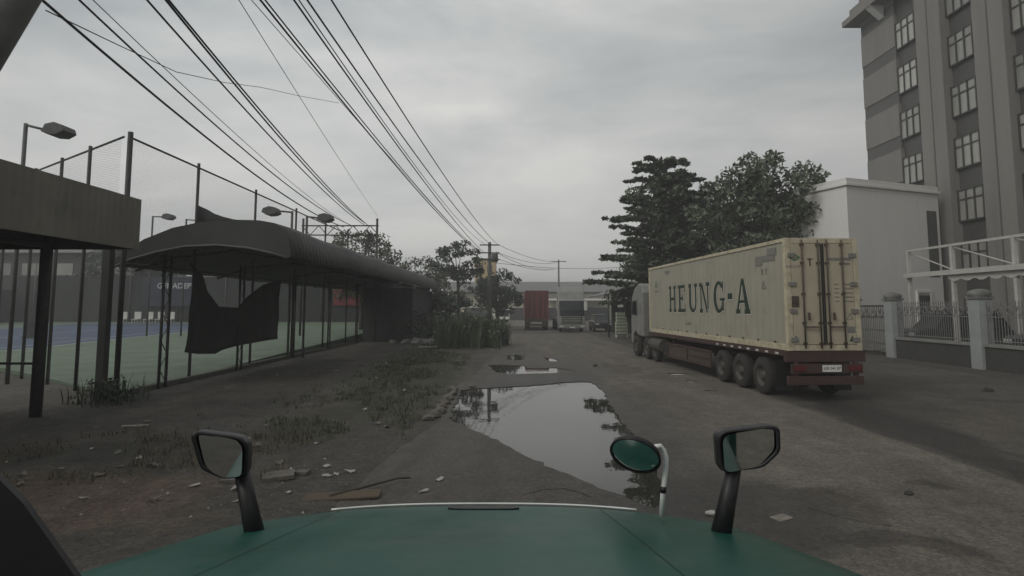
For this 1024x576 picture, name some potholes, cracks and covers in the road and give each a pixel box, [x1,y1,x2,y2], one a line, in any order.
pothole [488,365,573,374]
pothole [449,382,661,508]
